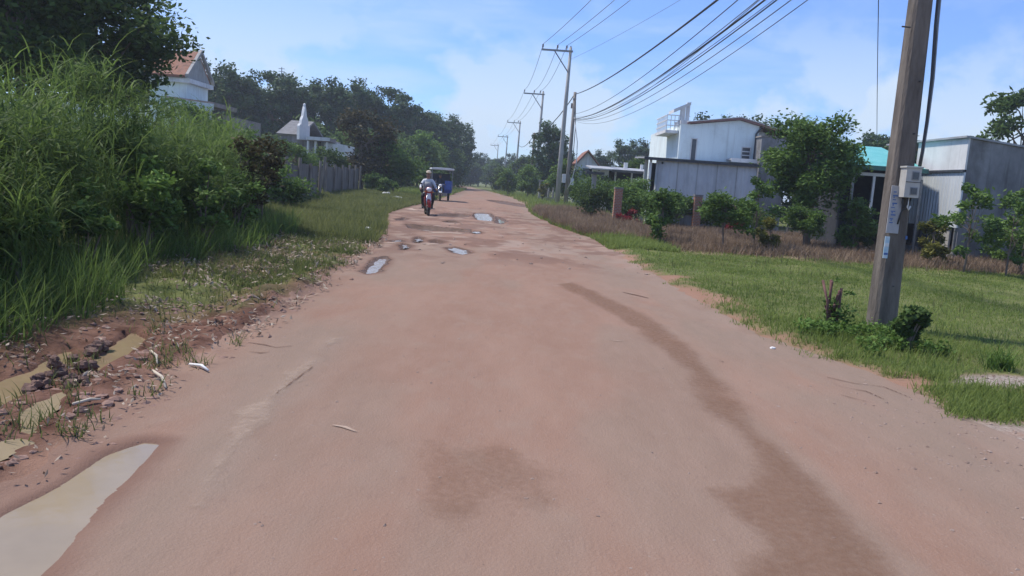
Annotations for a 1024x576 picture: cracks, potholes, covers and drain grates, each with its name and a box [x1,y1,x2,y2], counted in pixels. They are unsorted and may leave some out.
pothole [359,256,391,274]
pothole [472,213,494,221]
